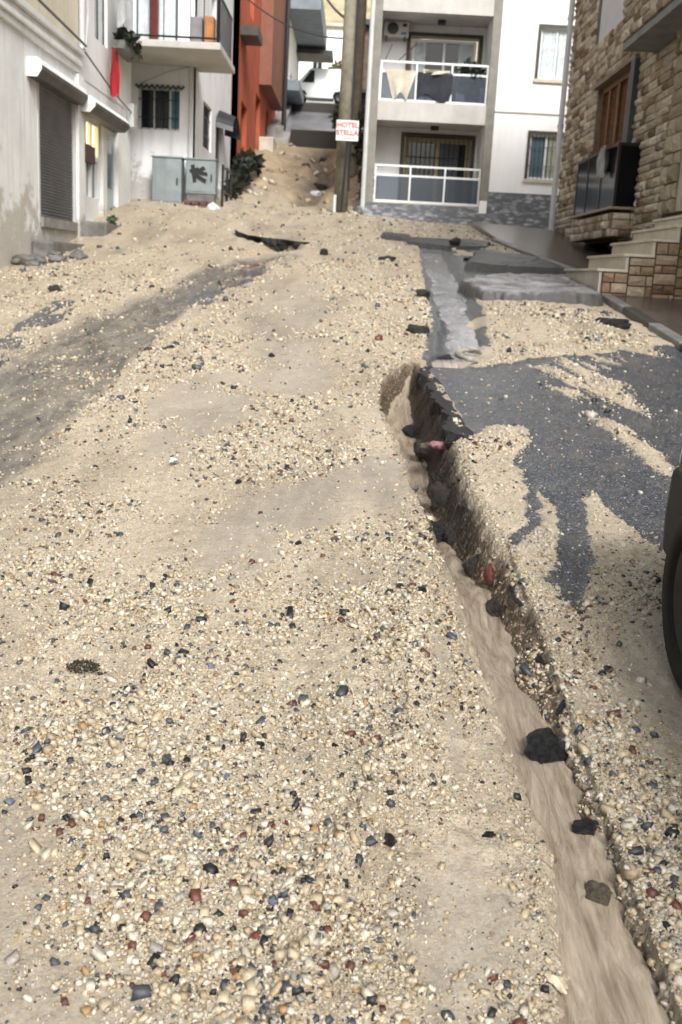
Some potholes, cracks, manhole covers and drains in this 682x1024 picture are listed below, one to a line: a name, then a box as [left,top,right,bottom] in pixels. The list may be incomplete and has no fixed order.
pothole [225,229,310,252]
crack [373,357,682,1024]
